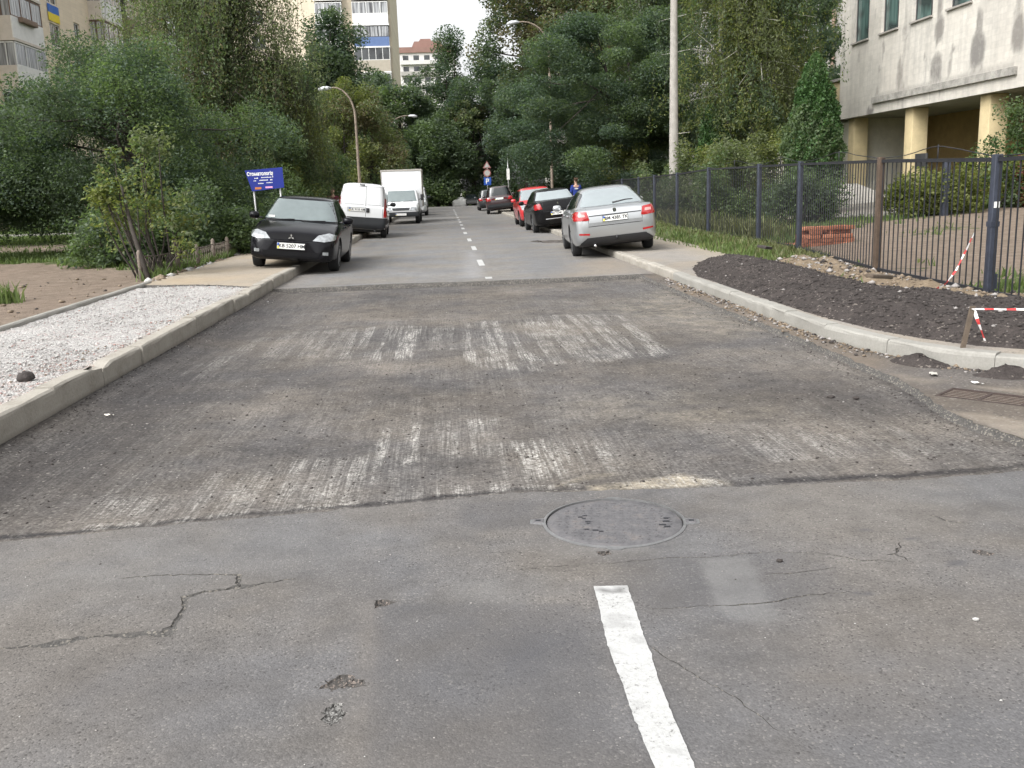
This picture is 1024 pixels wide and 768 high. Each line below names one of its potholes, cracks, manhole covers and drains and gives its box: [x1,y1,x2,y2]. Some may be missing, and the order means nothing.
pothole [374,599,397,609]
crack [513,543,908,574]
manhole cover [530,497,700,550]
pothole [319,674,366,692]
pothole [320,702,347,726]
crack [648,591,854,609]
crack [649,645,778,731]
crack [0,574,298,649]
drain grate [935,388,1024,407]
